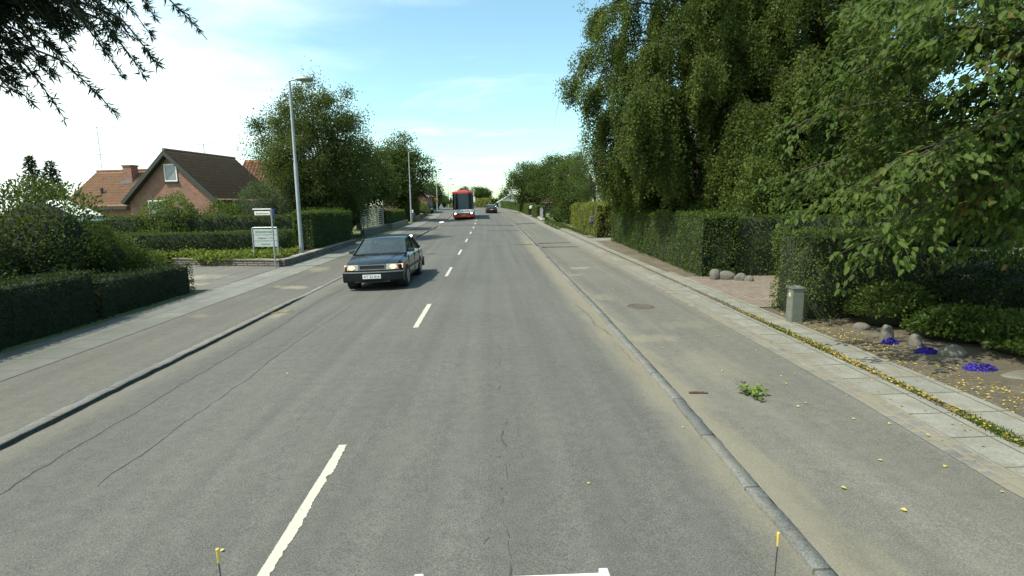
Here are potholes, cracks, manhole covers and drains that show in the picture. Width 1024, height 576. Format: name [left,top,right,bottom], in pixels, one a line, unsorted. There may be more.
crack [1,288,351,494]
